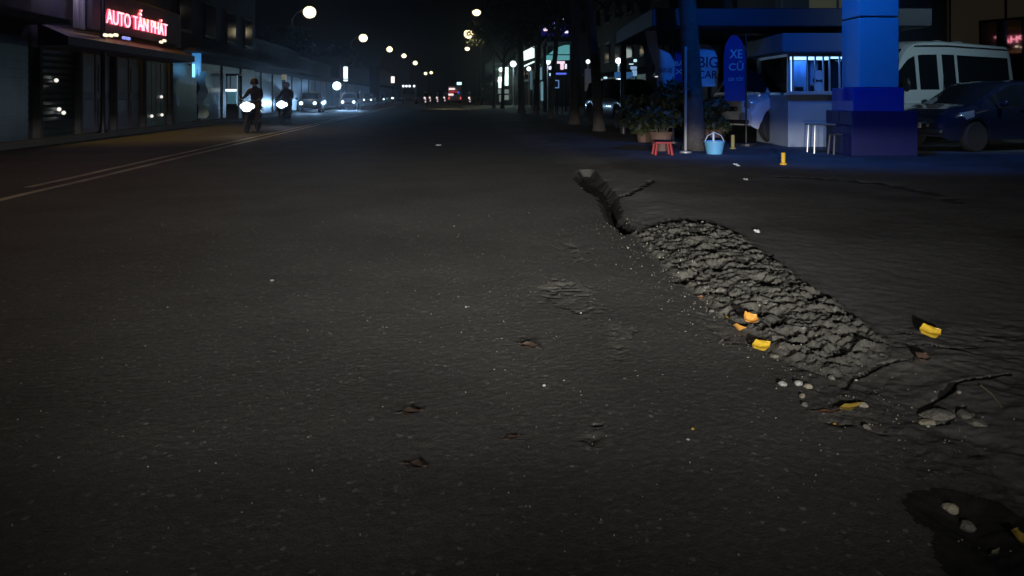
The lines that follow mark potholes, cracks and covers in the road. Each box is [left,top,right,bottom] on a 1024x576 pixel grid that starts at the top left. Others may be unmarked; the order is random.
crack [840,330,977,389]
crack [931,373,1011,426]
pothole [900,487,1024,576]
crack [619,180,654,198]
